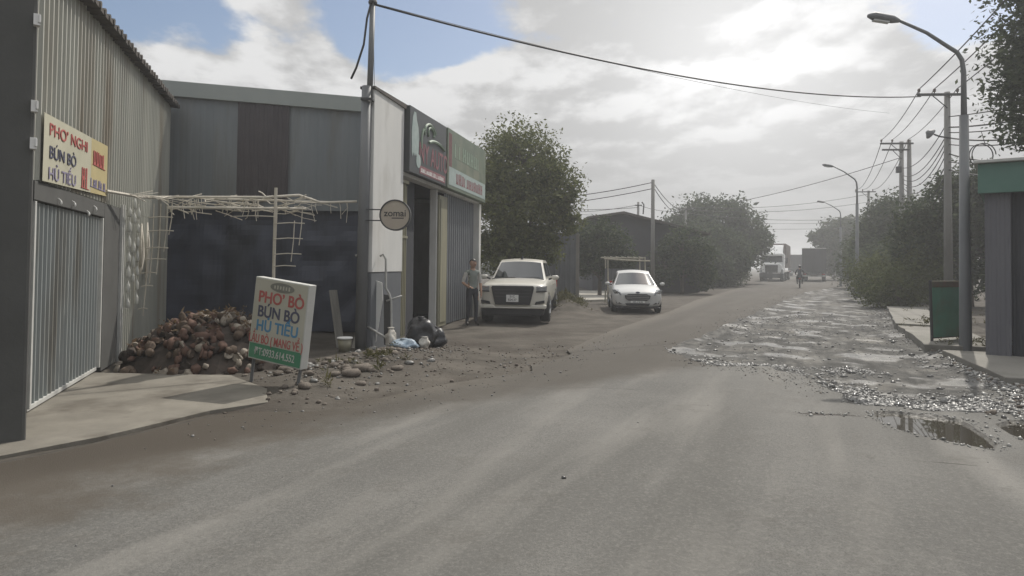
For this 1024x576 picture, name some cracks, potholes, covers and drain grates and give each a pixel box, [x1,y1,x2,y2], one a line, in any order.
pothole [995,420,1024,433]
pothole [667,288,1001,406]
pothole [872,411,998,449]
